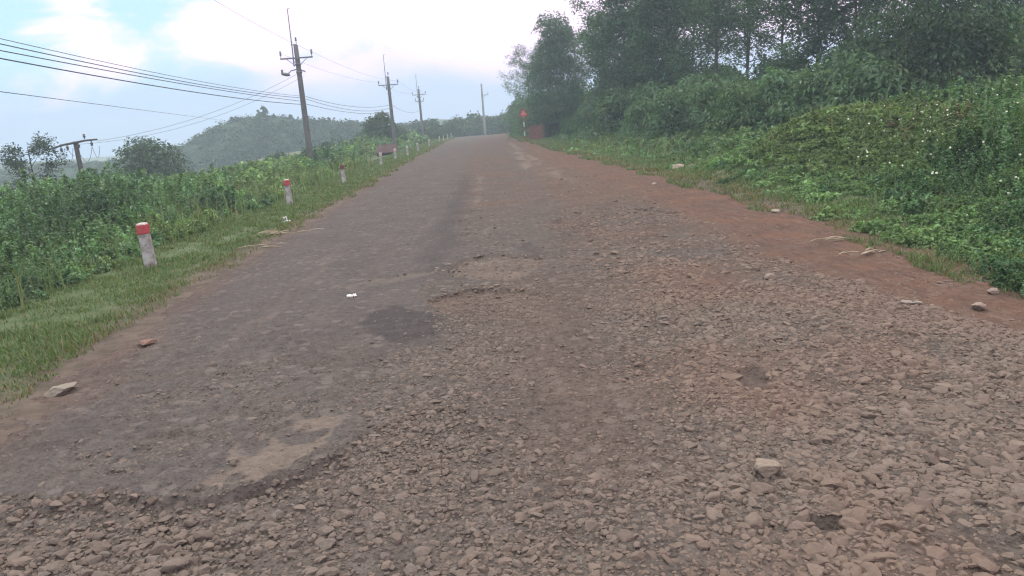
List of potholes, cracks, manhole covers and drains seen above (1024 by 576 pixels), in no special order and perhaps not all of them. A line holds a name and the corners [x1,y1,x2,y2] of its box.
pothole [809,511,846,532]
pothole [445,254,547,282]
pothole [731,365,780,390]
